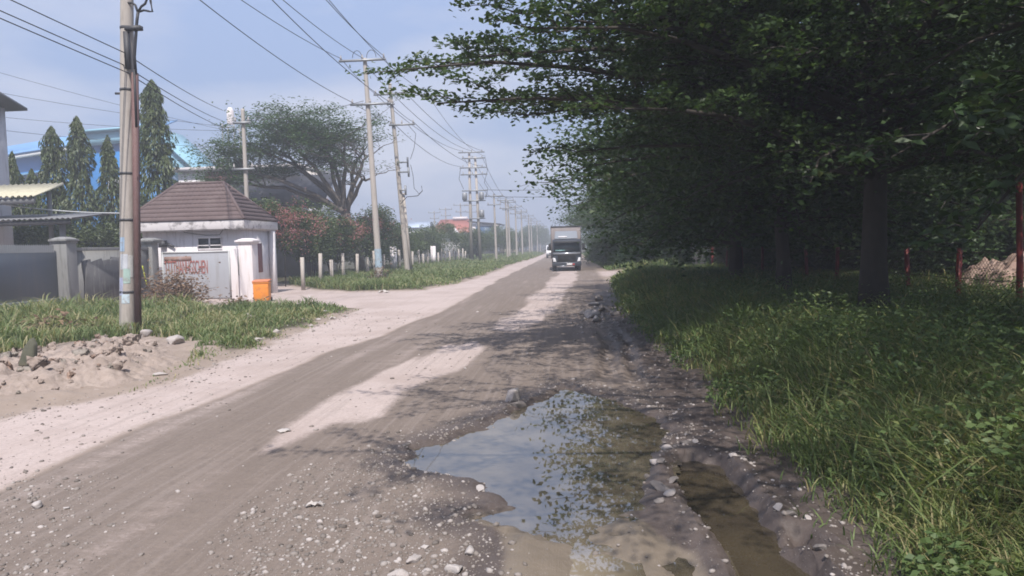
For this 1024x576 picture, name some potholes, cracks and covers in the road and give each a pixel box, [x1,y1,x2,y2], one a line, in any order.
pothole [661,445,846,576]
pothole [384,384,730,576]
